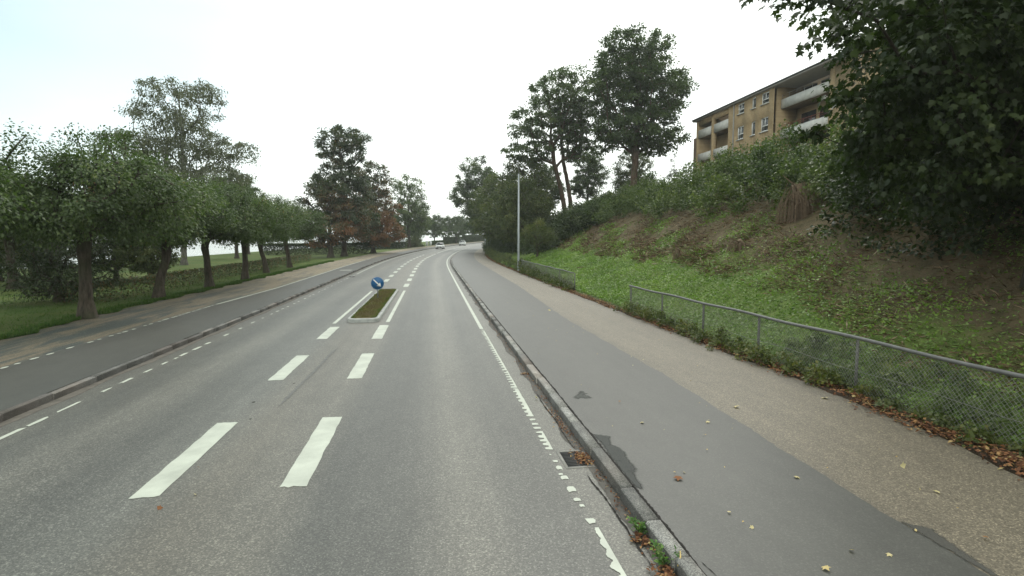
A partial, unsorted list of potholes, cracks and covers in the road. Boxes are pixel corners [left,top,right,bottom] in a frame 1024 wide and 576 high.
drain grate [556,450,595,469]
